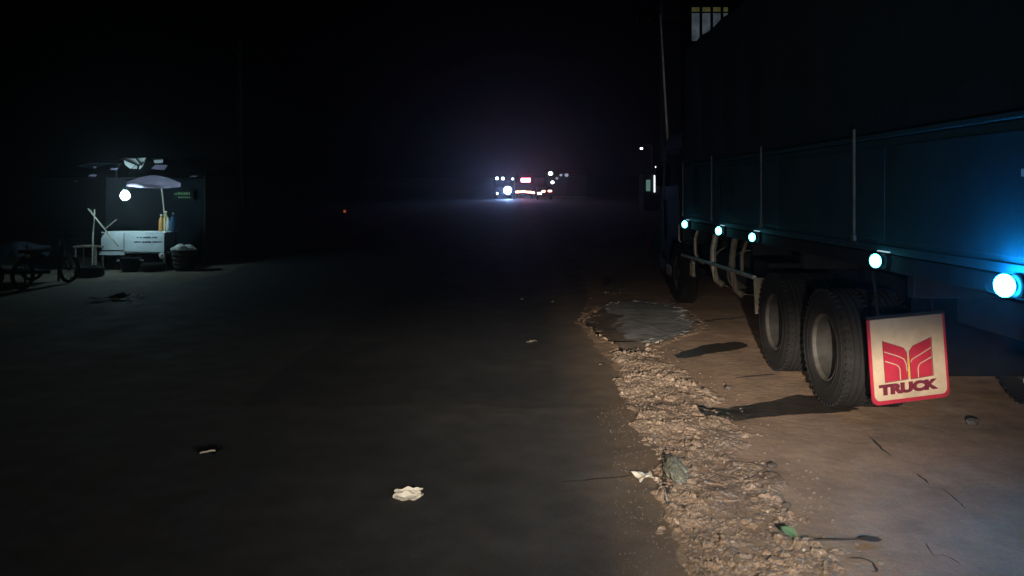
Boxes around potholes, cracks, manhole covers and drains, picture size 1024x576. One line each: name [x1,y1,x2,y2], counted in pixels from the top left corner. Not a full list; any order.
crack [868,435,965,508]
crack [851,557,878,572]
pothole [572,299,716,358]
